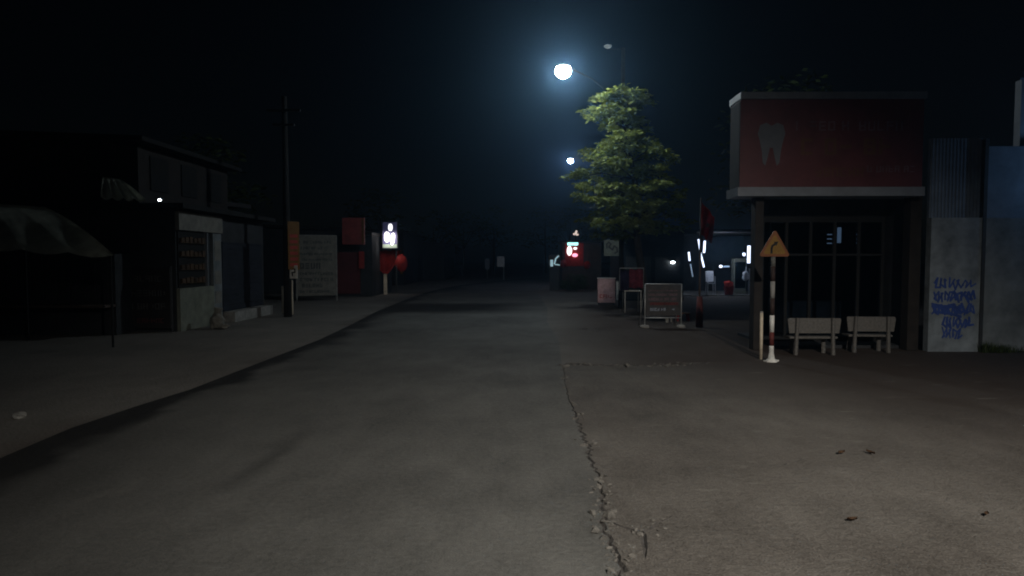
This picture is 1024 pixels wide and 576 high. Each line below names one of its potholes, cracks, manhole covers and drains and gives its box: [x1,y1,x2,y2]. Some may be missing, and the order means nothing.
crack [557,362,716,576]
